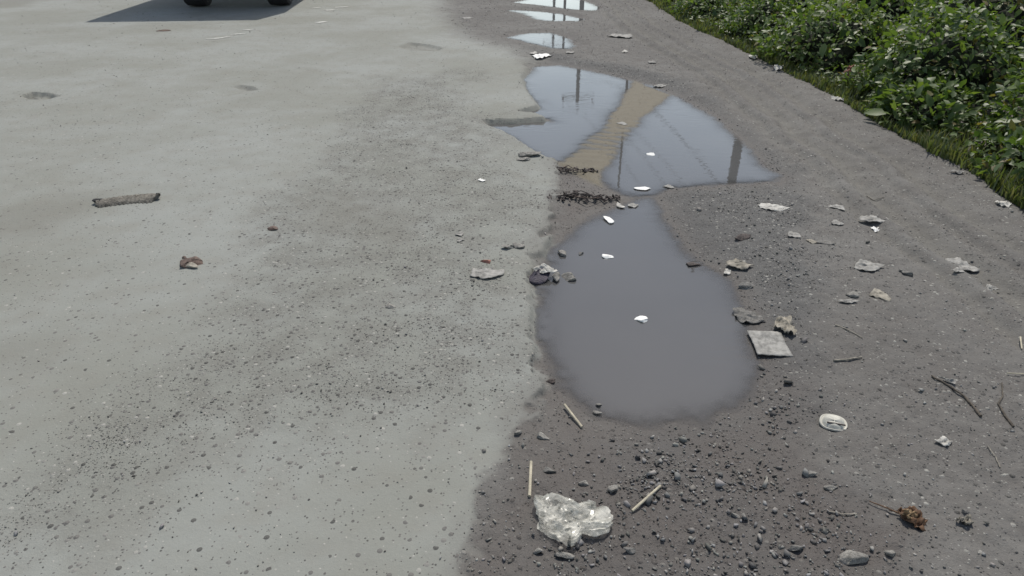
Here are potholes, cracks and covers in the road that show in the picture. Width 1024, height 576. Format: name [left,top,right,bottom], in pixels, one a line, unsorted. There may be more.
pothole [499,30,586,49]
pothole [507,0,606,11]
pothole [496,7,590,21]
pothole [481,62,798,199]
pothole [524,195,796,452]
